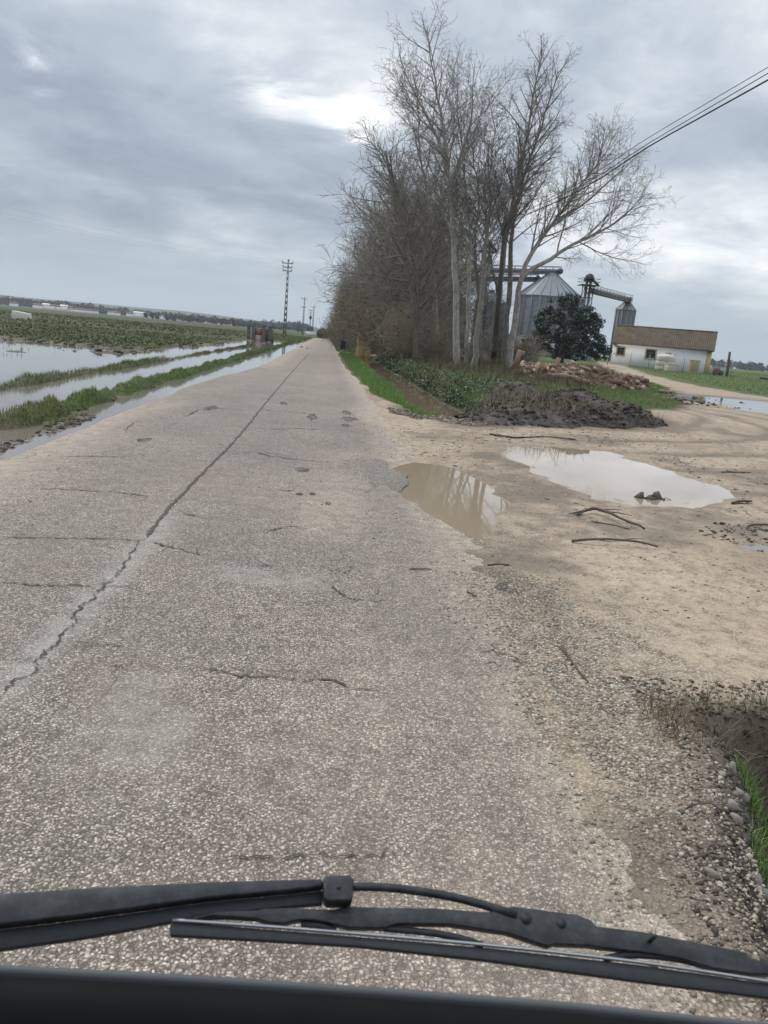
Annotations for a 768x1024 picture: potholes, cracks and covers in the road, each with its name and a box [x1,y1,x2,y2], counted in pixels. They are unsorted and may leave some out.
crack [22,637,135,704]
crack [3,563,133,602]
crack [211,847,407,880]
crack [199,657,381,691]
crack [319,578,397,602]
crack [10,536,201,555]
